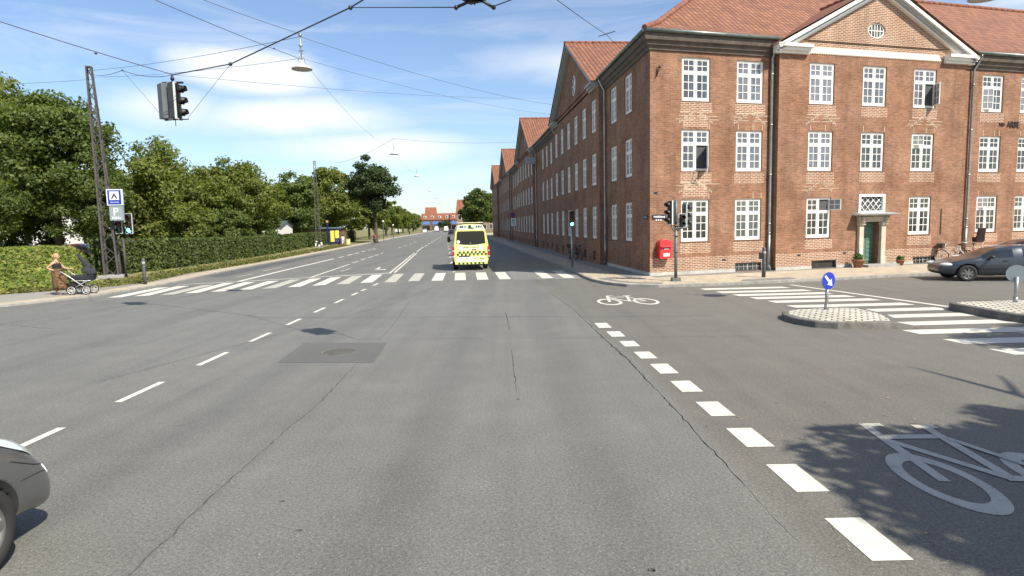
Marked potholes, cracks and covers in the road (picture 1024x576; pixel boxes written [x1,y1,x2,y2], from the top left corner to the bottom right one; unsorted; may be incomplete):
manhole cover [319,348,357,356]
crack [548,292,790,534]
crack [128,369,352,576]
